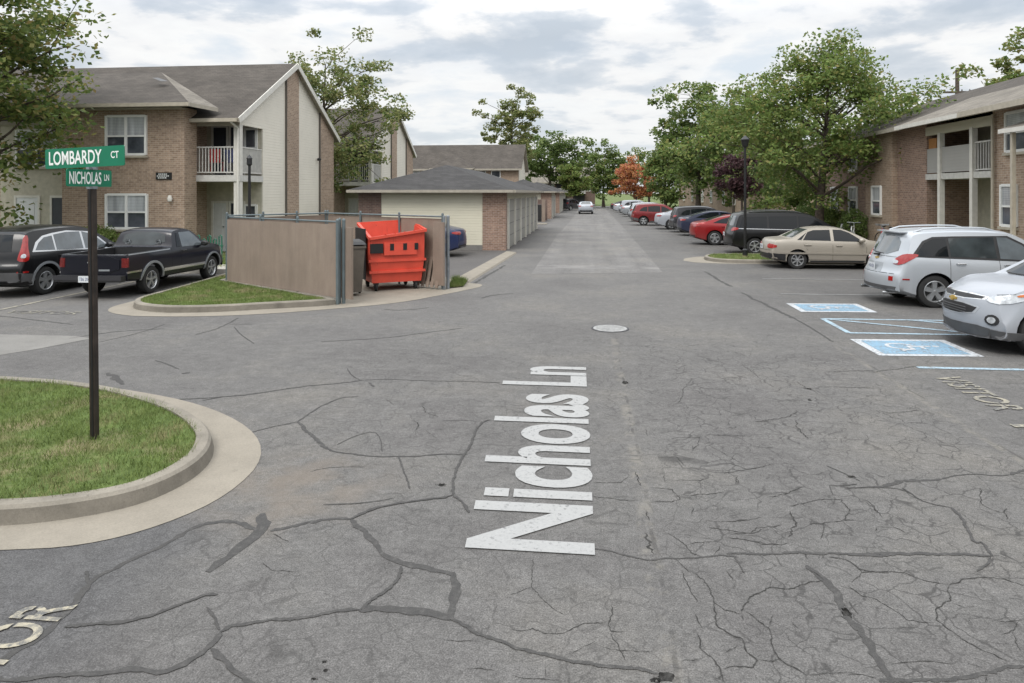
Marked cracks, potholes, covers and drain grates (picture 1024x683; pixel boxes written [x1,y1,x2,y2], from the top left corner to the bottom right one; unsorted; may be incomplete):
crack [594,410,1024,680]
crack [510,557,648,659]
pothole [655,669,677,683]
crack [195,318,254,344]
crack [321,328,460,342]
